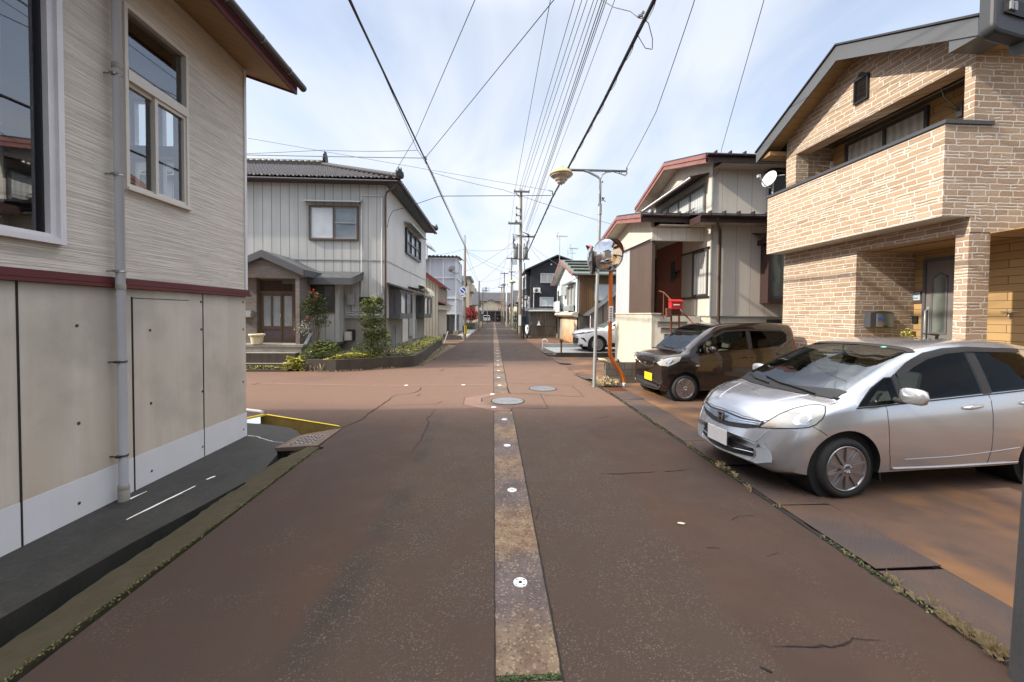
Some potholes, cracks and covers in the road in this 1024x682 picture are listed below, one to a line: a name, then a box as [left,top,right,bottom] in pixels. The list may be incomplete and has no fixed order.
crack [319,388,440,446]
crack [787,637,877,648]
drain grate [275,428,341,455]
manhole cover [491,397,525,405]
